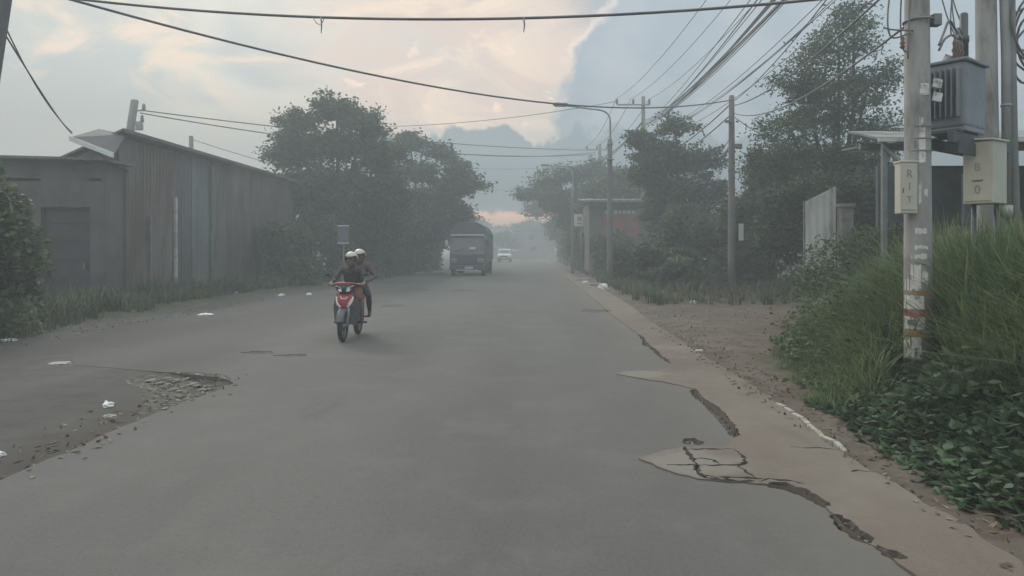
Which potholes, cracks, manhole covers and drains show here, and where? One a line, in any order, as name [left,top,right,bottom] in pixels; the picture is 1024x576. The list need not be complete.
crack [667,448,805,484]
crack [639,334,670,362]
pothole [121,372,232,417]
